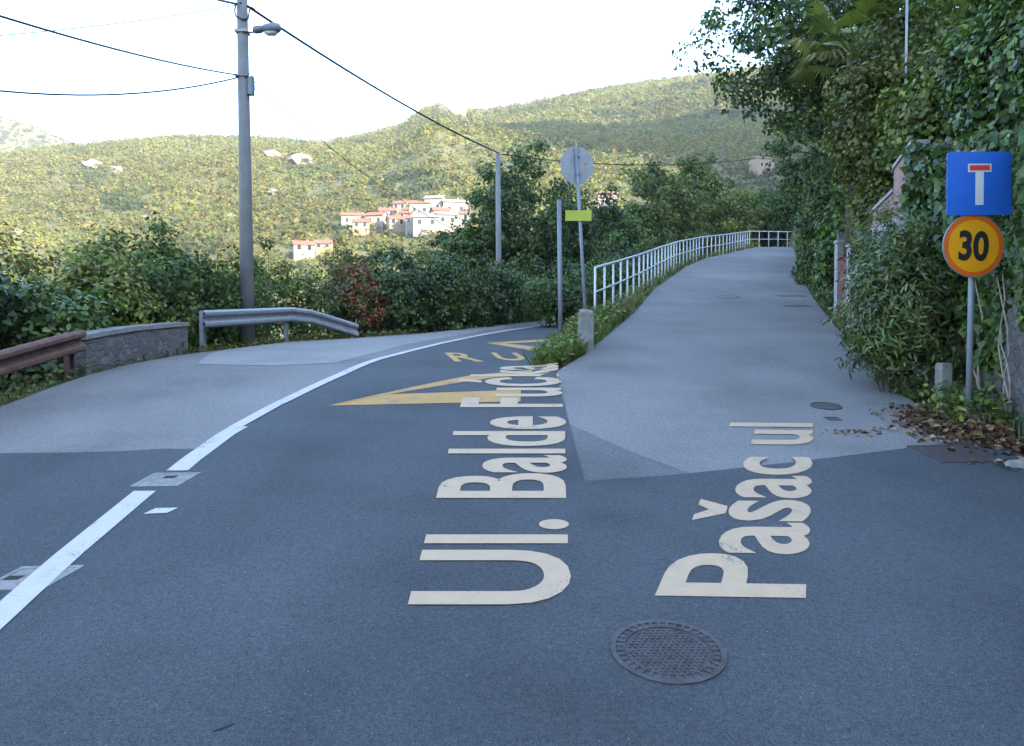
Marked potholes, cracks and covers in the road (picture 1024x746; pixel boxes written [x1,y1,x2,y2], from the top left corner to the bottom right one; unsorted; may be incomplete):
manhole cover [610,619,727,685]
manhole cover [907,444,1006,463]
manhole cover [129,472,201,487]
manhole cover [0,565,86,590]
manhole cover [810,402,842,410]
